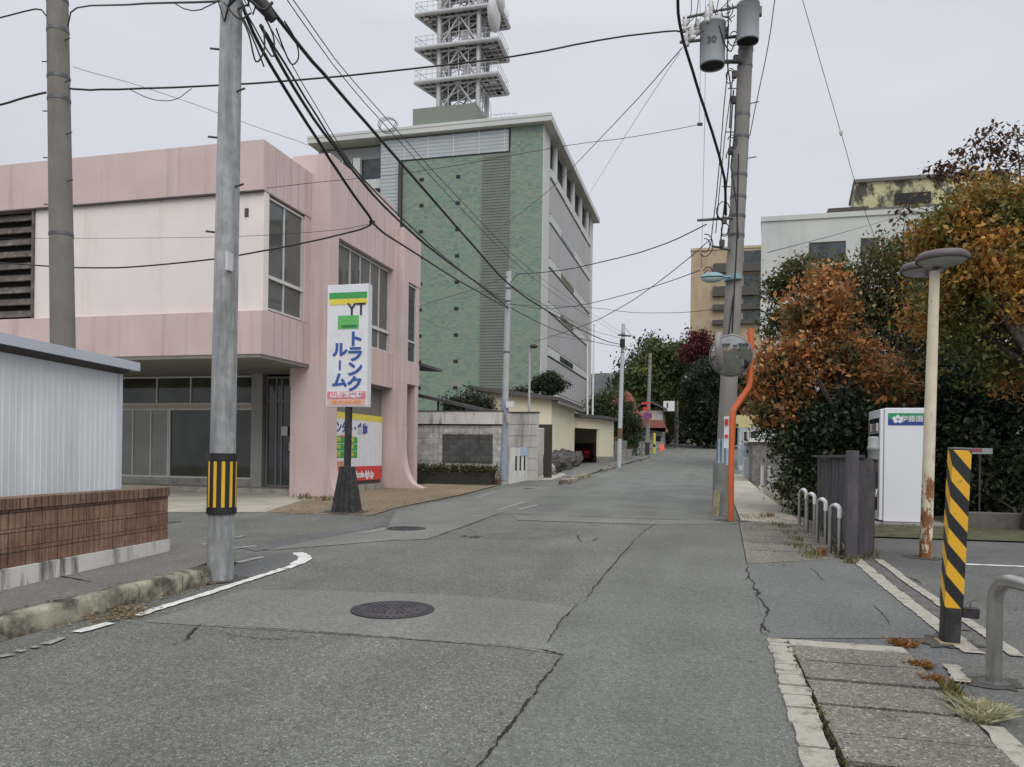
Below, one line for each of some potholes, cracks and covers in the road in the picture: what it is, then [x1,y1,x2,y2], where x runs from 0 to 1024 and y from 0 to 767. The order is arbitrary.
crack [746,566,770,634]
manhole cover [350,601,435,619]
